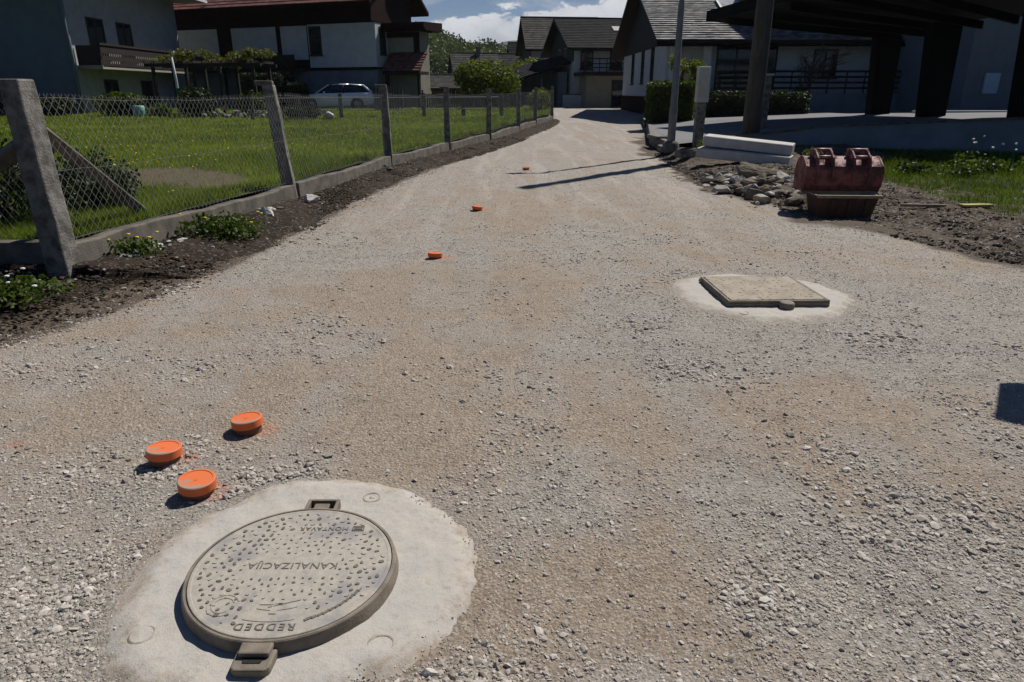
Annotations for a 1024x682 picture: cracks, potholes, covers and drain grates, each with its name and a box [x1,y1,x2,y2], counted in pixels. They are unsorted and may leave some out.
manhole cover [699,276,830,310]
manhole cover [181,499,399,678]
